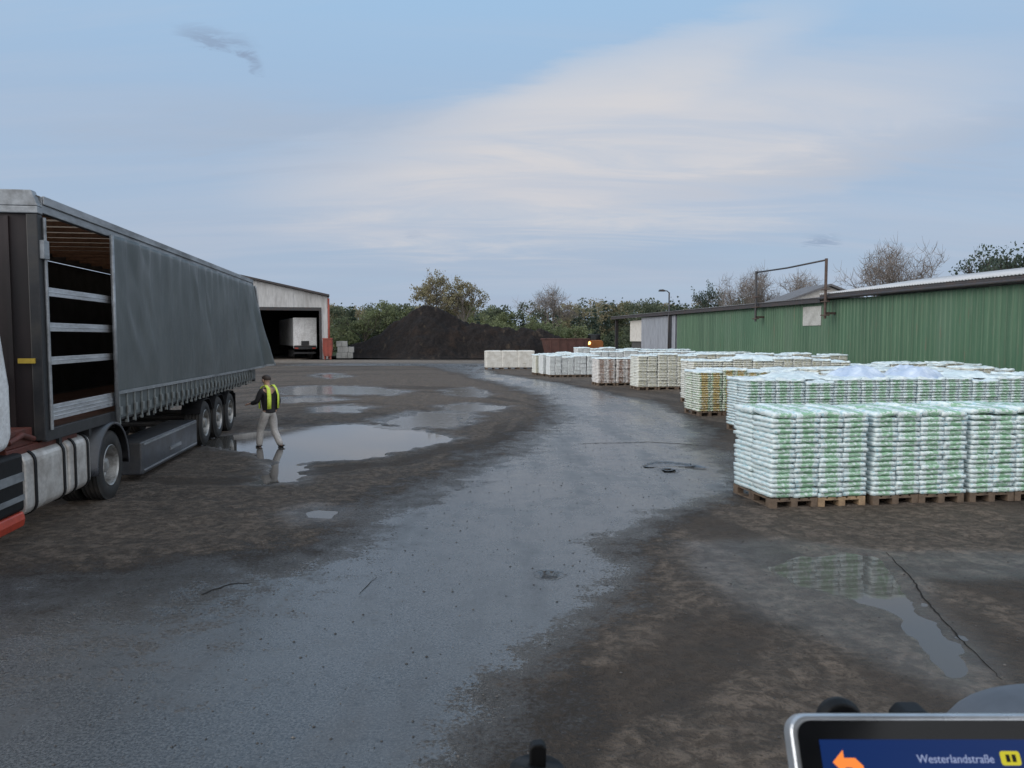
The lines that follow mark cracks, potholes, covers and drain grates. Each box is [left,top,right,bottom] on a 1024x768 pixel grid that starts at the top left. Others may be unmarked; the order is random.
crack [886,552,1003,680]
